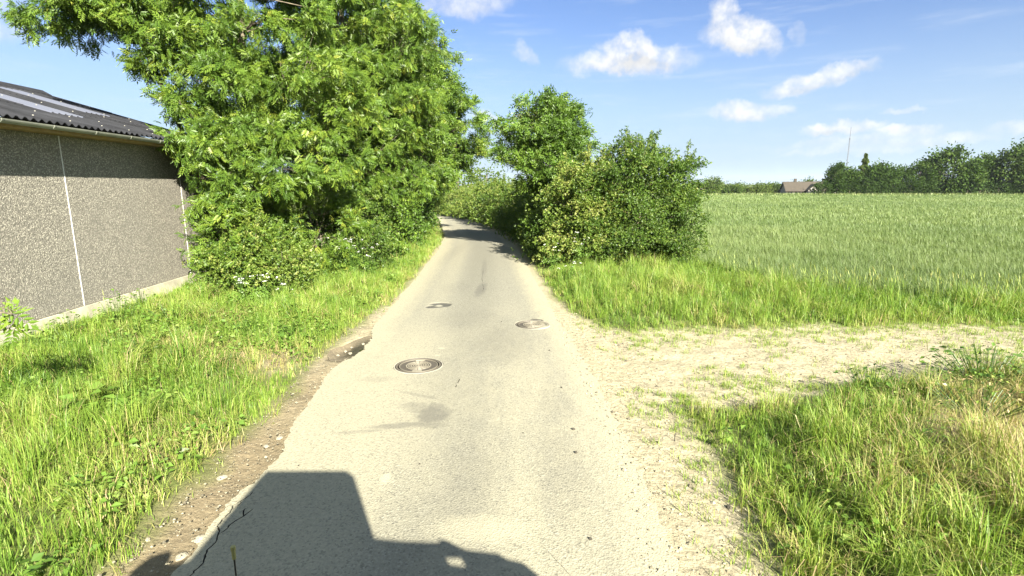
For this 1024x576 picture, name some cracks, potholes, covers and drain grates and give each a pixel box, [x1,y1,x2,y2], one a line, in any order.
manhole cover [514,320,550,329]
crack [190,492,253,576]
manhole cover [394,358,443,374]
